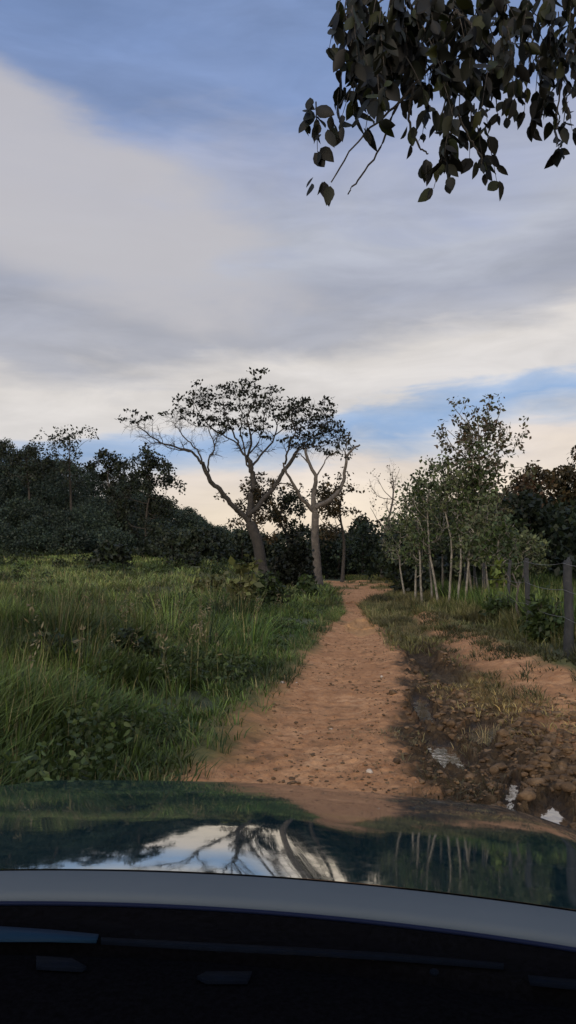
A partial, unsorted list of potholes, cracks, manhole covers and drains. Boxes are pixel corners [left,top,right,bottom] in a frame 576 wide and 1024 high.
pothole [497,767,523,810]
